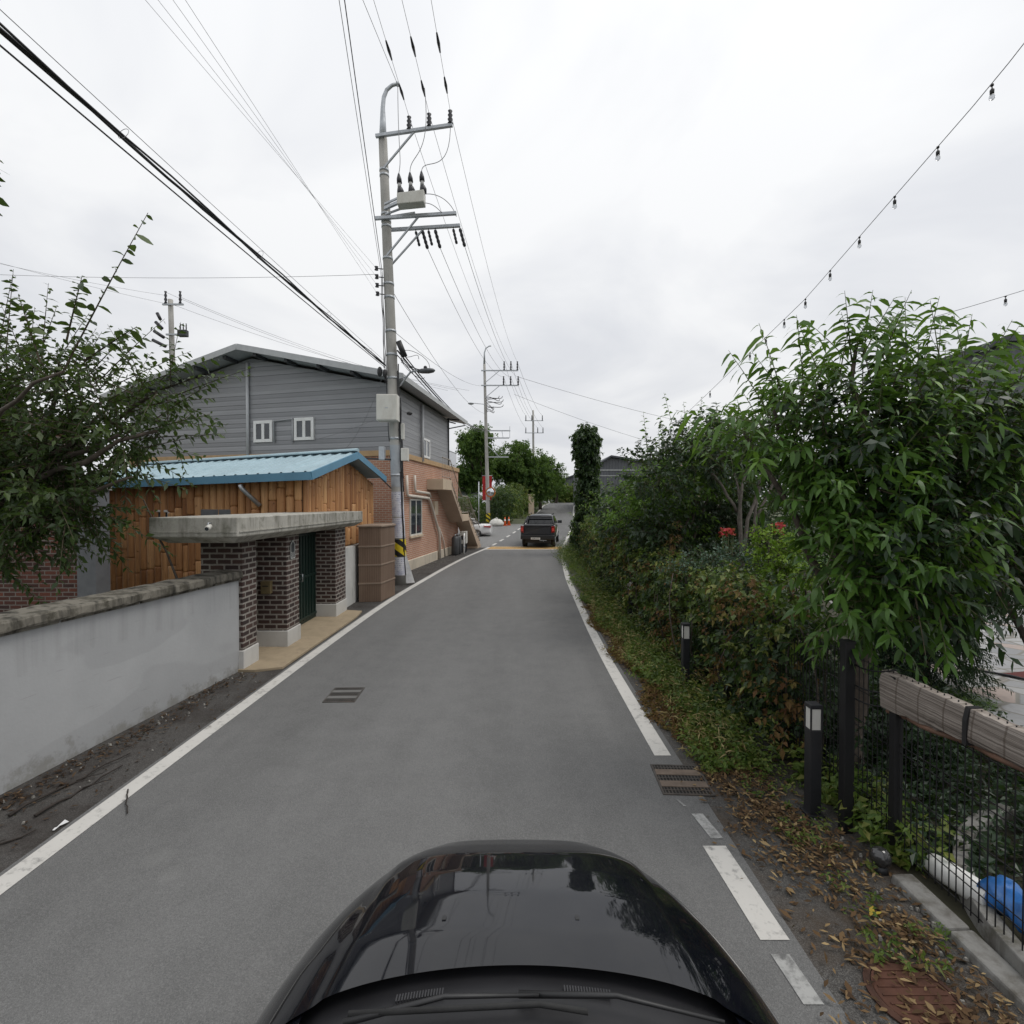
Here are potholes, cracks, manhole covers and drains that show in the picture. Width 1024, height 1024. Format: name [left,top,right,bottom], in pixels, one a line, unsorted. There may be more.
manhole cover [863,958,973,1024]
drain grate [322,687,365,703]
drain grate [650,764,716,796]
